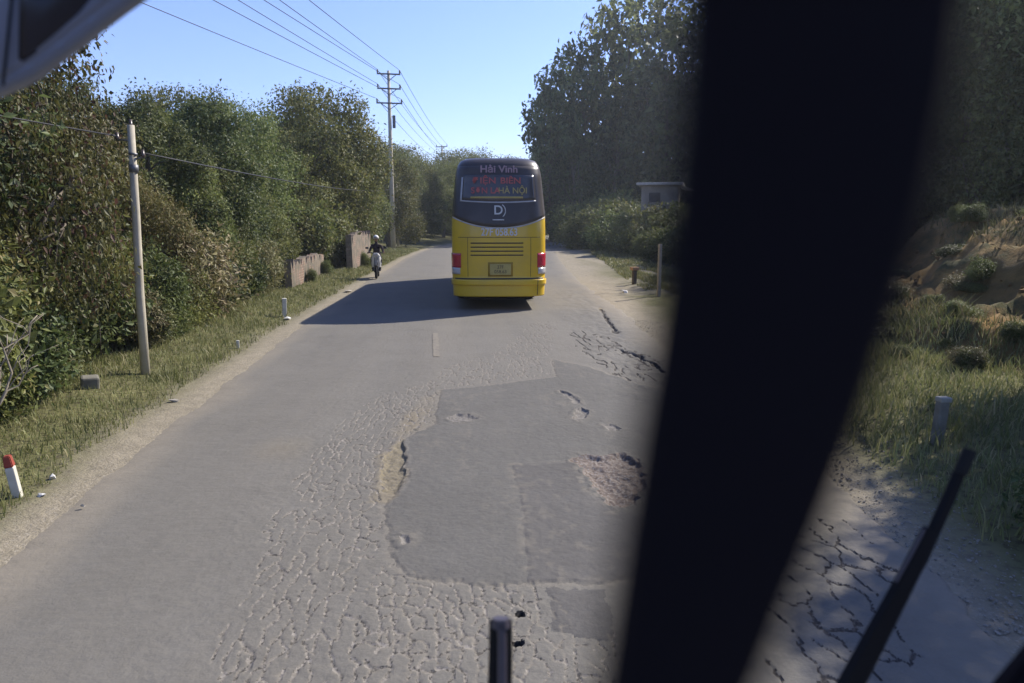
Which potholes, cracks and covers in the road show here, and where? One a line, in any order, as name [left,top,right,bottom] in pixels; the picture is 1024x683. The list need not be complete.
crack [773,520,921,683]
pothole [569,452,628,507]
pothole [447,414,479,422]
crack [210,321,600,683]
pothole [572,407,589,421]
pothole [559,390,580,404]
crack [570,309,645,381]
pothole [379,440,408,494]
